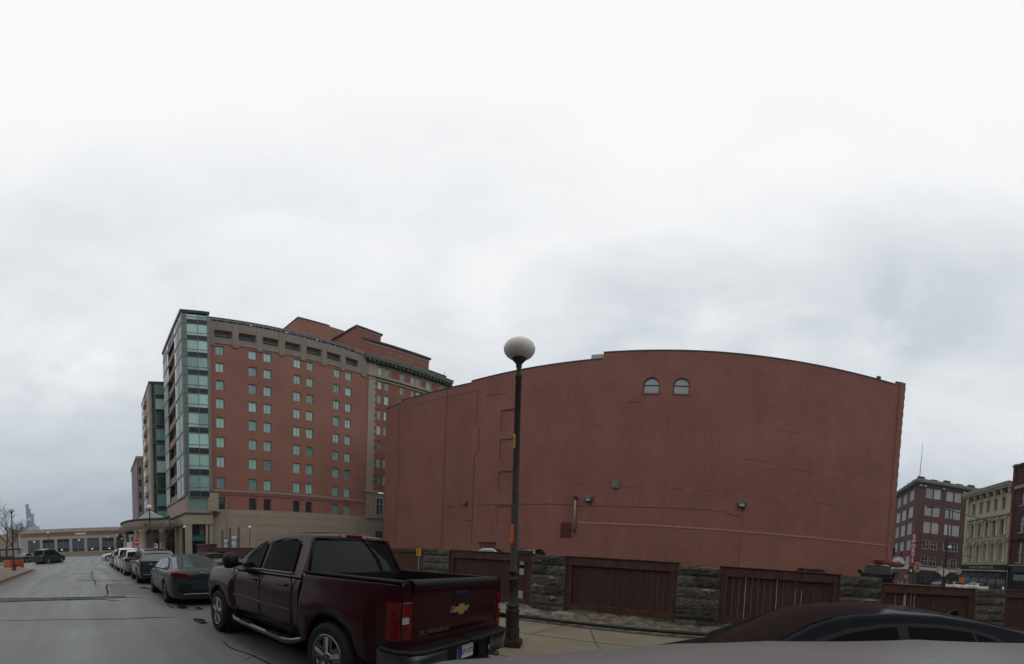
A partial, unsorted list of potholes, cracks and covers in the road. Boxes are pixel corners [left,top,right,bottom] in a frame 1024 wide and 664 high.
crack [0,569,196,621]
crack [222,641,271,664]
